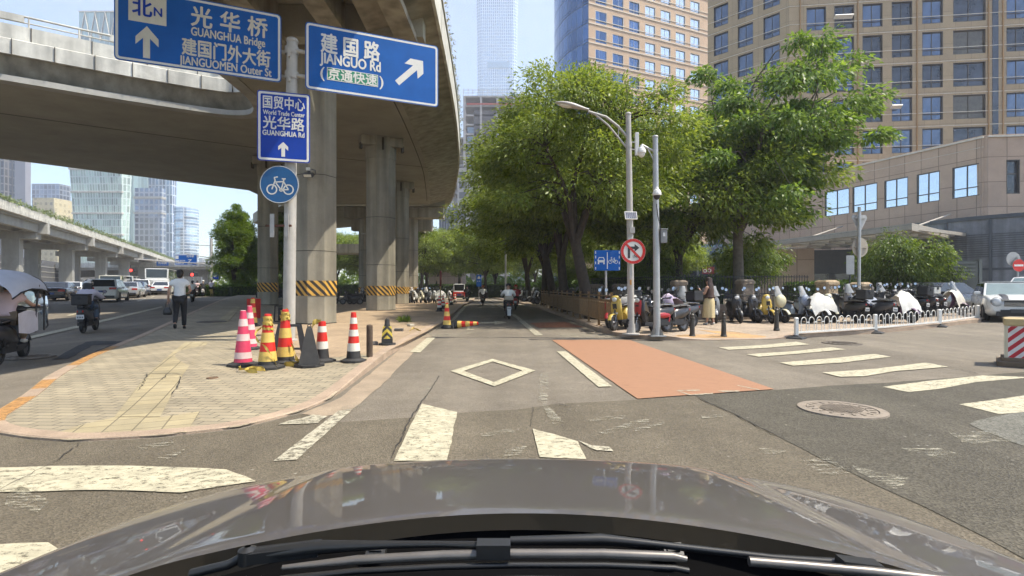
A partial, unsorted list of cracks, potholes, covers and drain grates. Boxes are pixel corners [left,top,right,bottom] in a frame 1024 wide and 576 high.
crack [391,376,439,459]
manhole cover [797,400,890,420]
